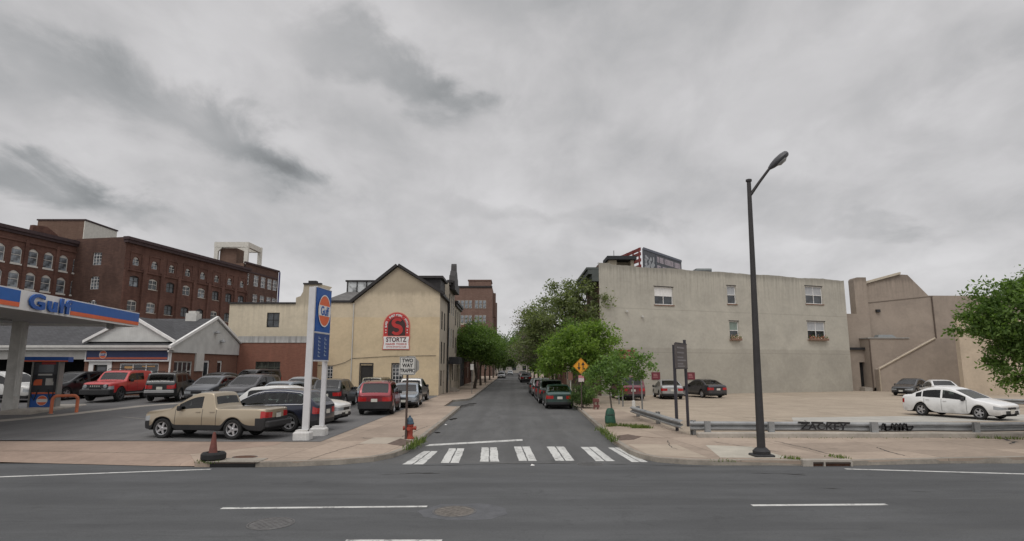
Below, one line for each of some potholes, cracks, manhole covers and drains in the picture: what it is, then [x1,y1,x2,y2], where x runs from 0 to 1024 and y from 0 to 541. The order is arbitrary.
manhole cover [246,517,295,530]
manhole cover [416,503,508,520]
